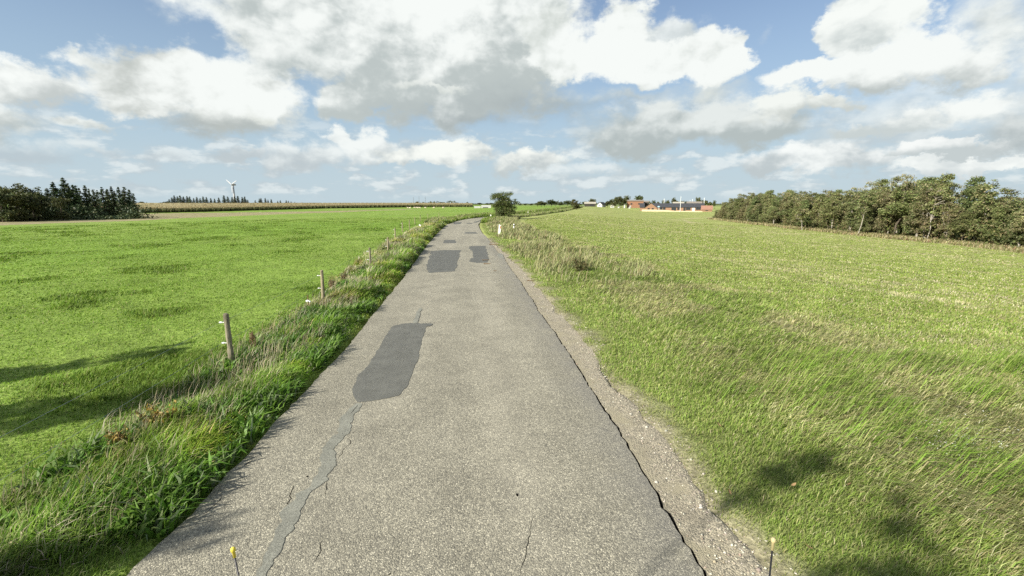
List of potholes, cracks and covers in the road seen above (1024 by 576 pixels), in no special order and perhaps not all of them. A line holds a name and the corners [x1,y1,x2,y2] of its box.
crack [244,403,362,576]
